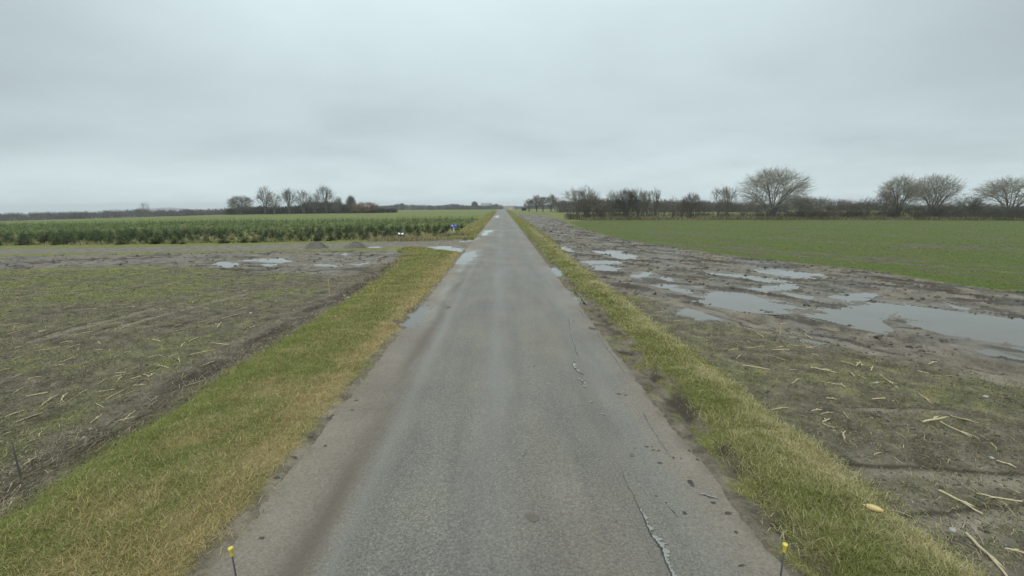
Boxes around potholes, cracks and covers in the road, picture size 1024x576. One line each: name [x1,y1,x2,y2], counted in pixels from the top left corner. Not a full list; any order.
crack [622,471,679,576]
crack [568,310,625,415]
